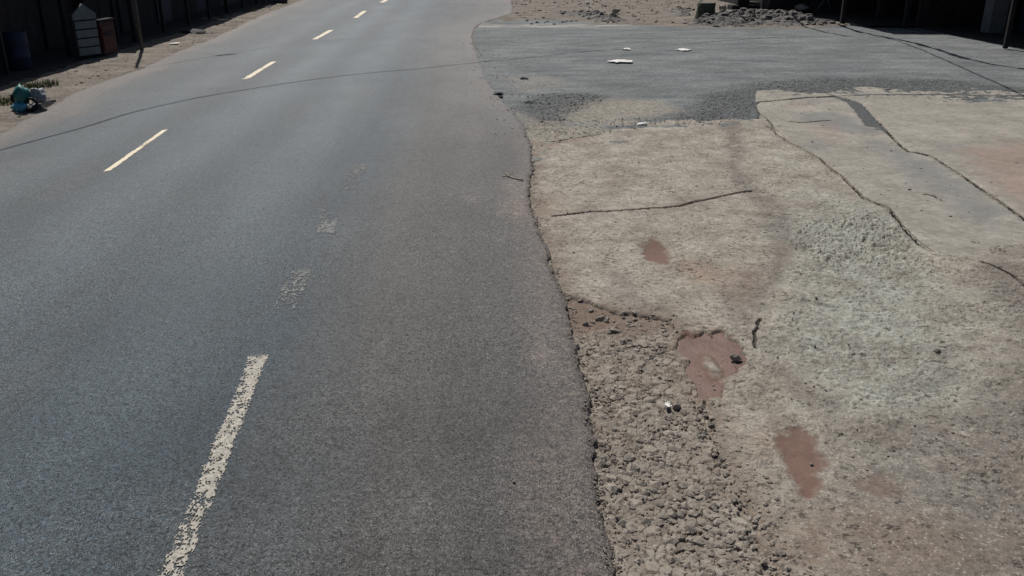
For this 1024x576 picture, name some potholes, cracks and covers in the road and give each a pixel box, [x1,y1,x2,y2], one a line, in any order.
pothole [676,333,747,400]
crack [554,190,752,216]
crack [982,261,1024,285]
crack [756,96,931,250]
